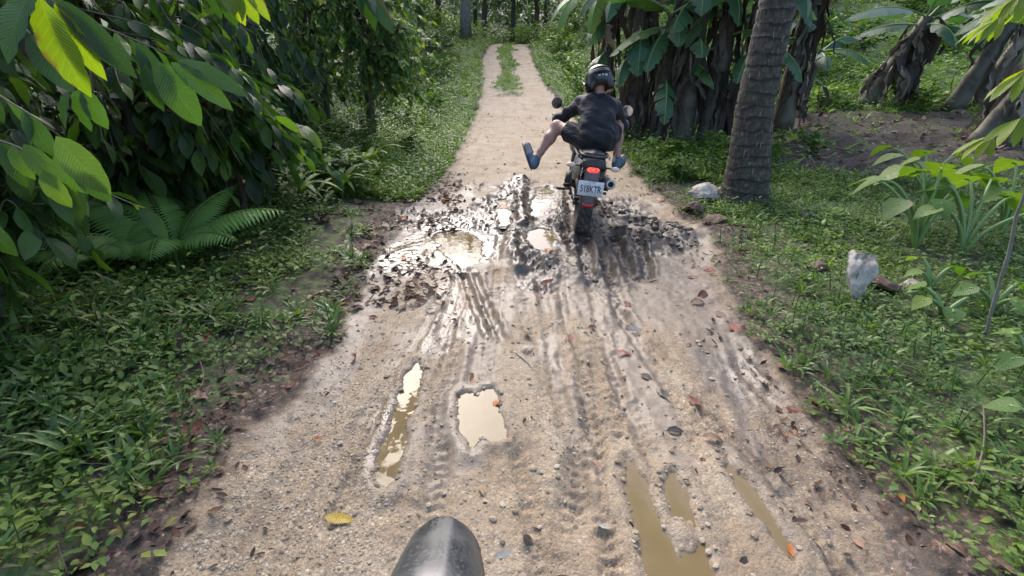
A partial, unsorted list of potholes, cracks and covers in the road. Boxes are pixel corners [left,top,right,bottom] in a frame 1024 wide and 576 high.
pothole [521,224,565,250]
pothole [449,381,513,457]
pothole [424,228,494,273]
